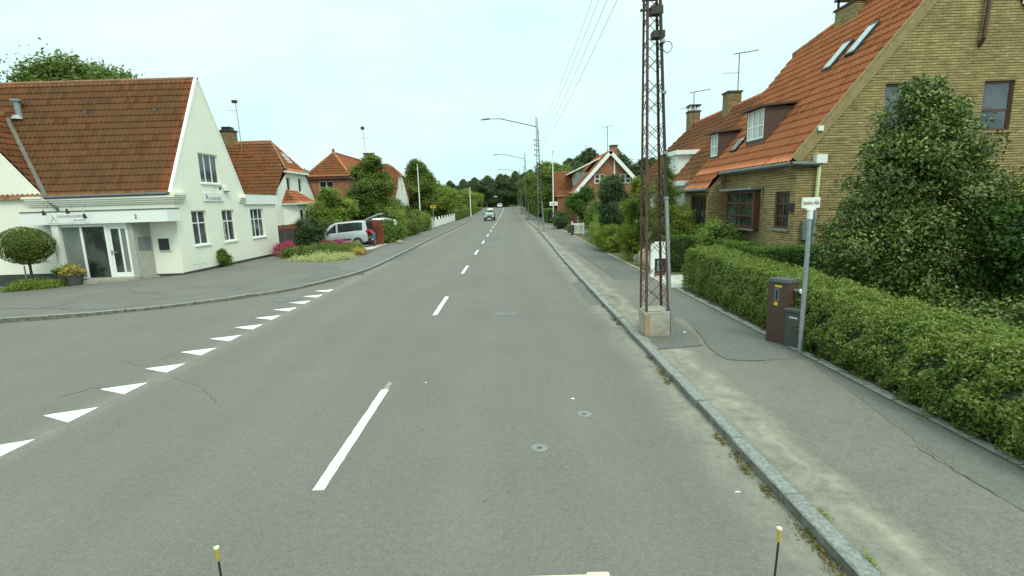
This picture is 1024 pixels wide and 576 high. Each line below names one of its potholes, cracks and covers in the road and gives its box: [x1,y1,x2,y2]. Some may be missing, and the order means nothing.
utility cover [532,444,548,452]
